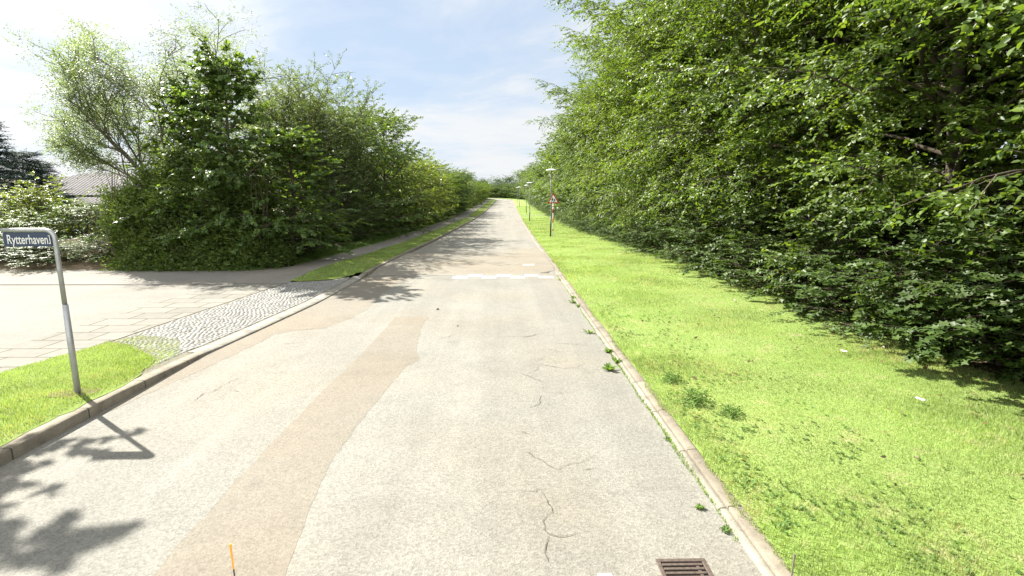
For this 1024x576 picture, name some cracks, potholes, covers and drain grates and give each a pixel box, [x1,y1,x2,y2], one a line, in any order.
drain grate [655,558,714,576]
crack [498,488,582,562]
